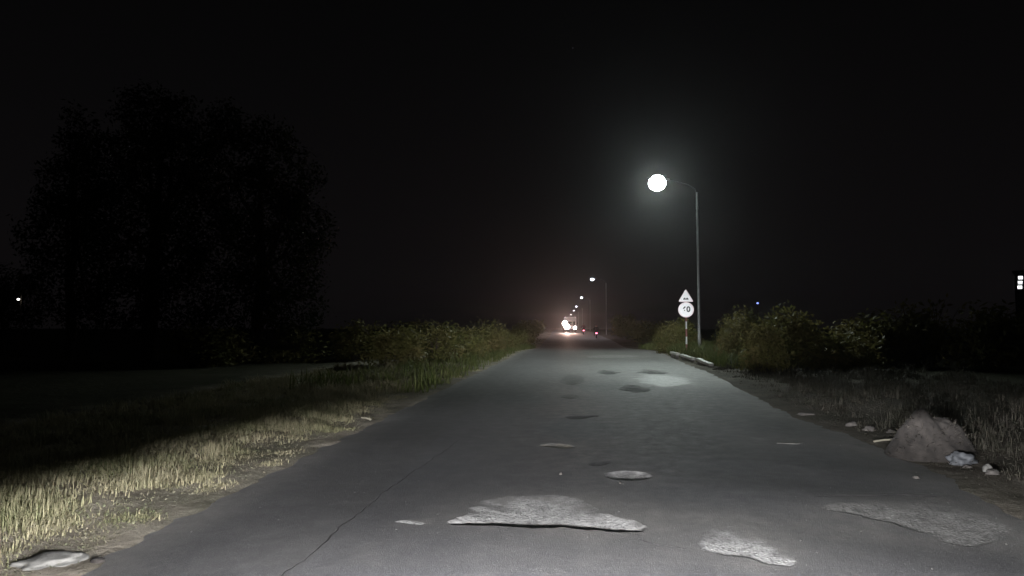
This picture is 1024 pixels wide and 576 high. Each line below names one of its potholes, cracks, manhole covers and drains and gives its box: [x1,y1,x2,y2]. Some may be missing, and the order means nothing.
pothole [560,374,584,385]
crack [281,442,456,576]
pothole [618,385,651,393]
